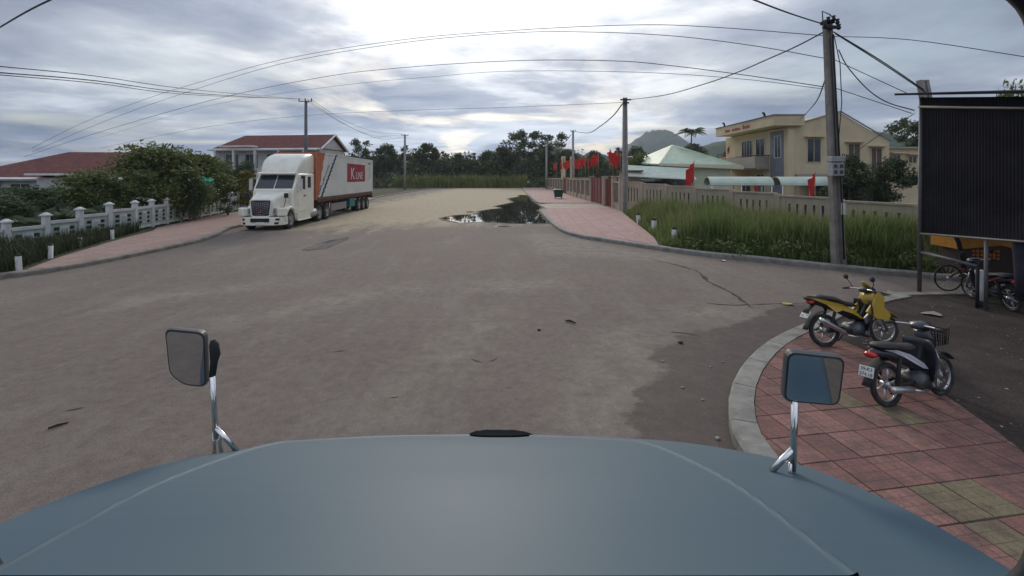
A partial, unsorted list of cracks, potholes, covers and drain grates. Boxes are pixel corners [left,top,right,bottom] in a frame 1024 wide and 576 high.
crack [653,259,782,308]
